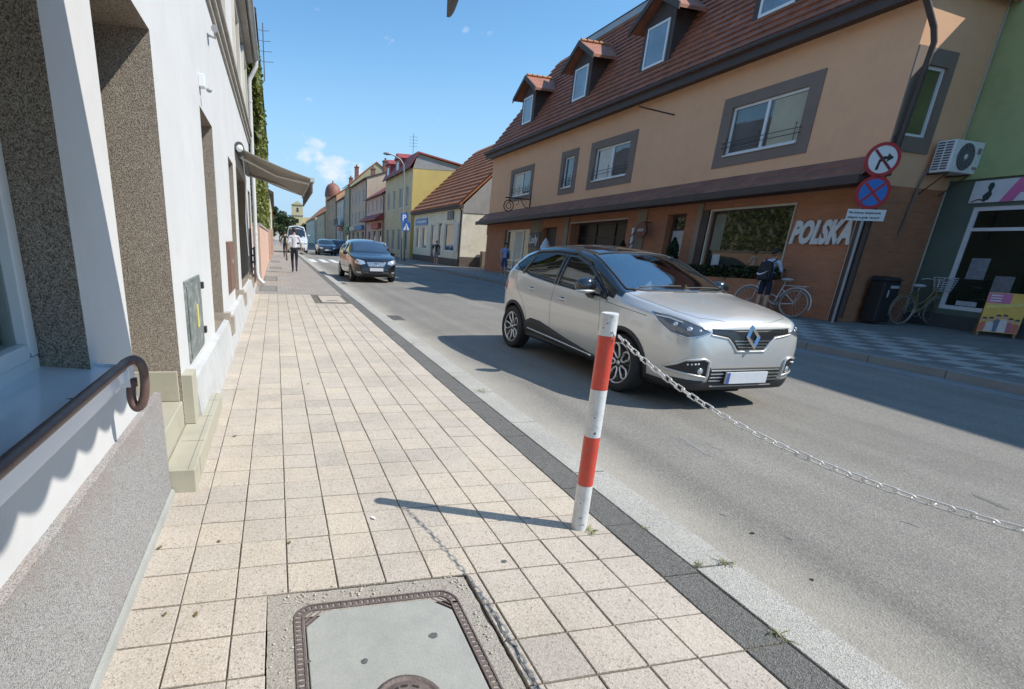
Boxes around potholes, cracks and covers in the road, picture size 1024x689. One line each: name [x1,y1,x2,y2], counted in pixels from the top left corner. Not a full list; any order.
manhole cover [317,295,347,303]
crack [679,436,723,456]
crack [973,494,1008,509]
manhole cover [266,572,526,689]
